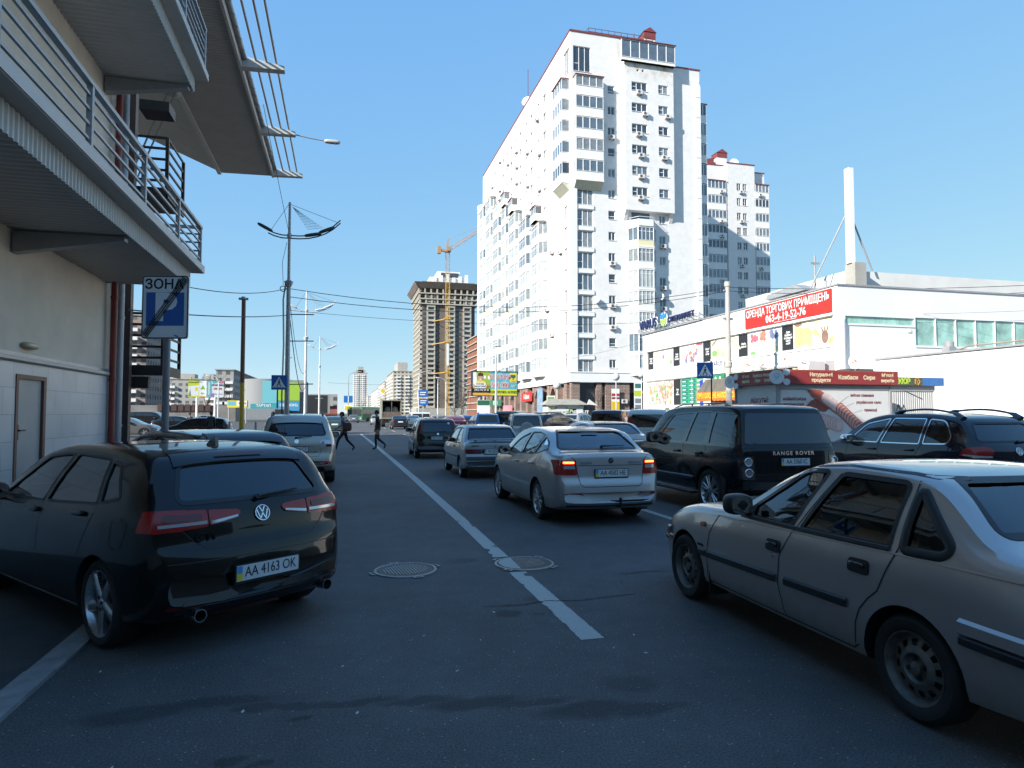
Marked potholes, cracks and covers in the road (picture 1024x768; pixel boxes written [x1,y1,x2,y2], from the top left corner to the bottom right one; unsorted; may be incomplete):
manhole cover [492,556,558,571]
manhole cover [368,562,441,579]
crack [500,570,670,606]
